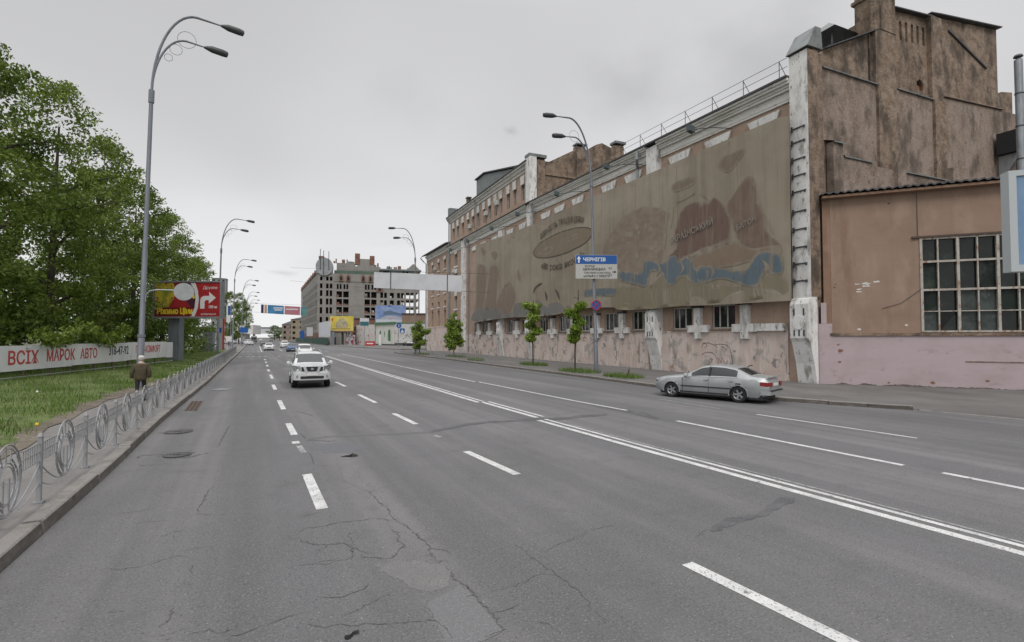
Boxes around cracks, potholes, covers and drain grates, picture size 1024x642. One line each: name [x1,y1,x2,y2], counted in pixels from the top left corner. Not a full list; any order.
crack [451,525,613,636]
crack [222,493,451,641]
crack [121,487,217,534]
drain grate [184,401,203,411]
